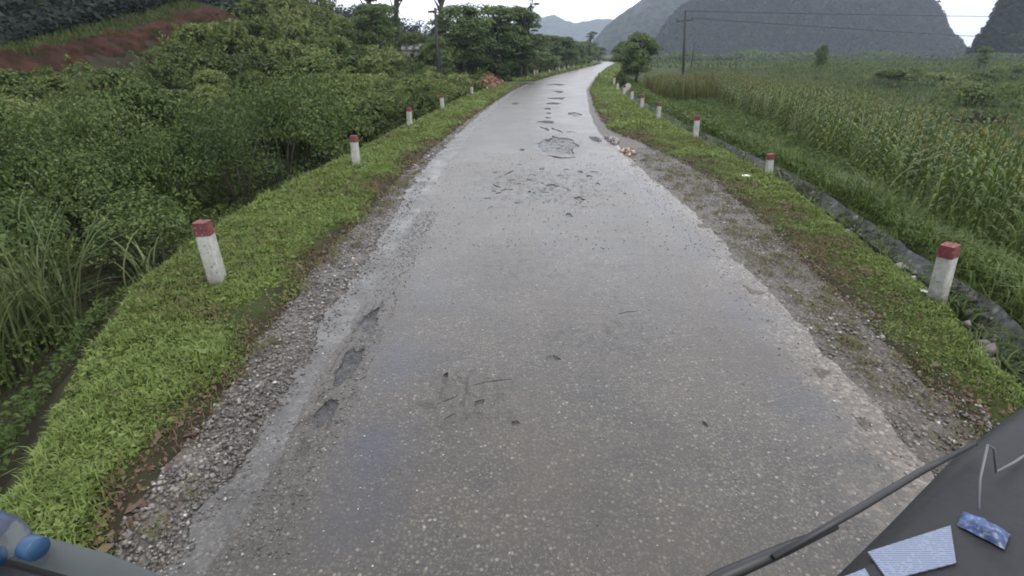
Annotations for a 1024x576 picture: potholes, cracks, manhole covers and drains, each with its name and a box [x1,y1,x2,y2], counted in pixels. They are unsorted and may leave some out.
pothole [313,399,339,428]
pothole [360,307,380,331]
pothole [333,347,364,388]
pothole [538,135,580,155]
